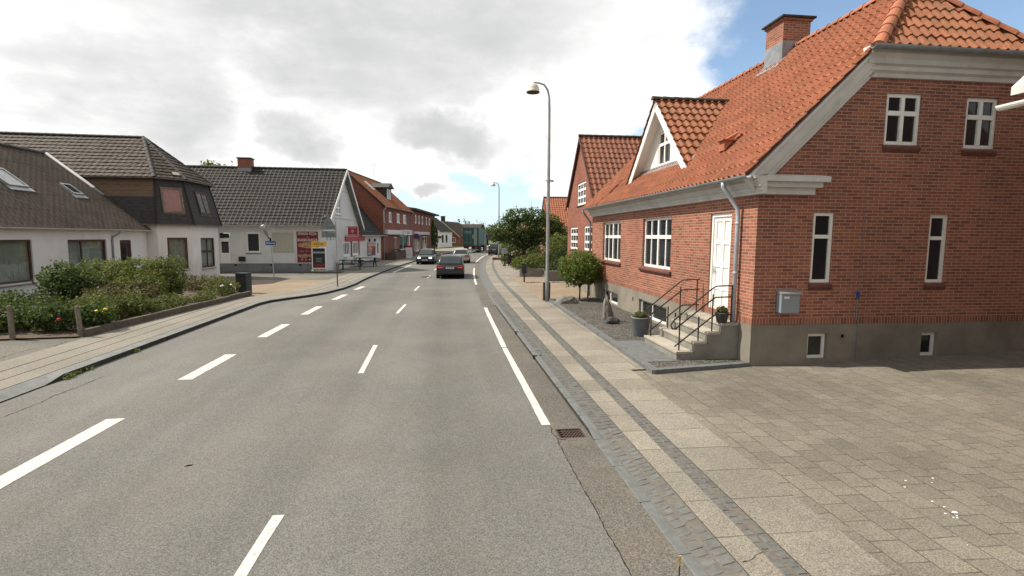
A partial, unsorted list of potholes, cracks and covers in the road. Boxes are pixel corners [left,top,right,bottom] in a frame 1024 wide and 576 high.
crack [550,426,632,576]
drain grate [555,428,586,438]
